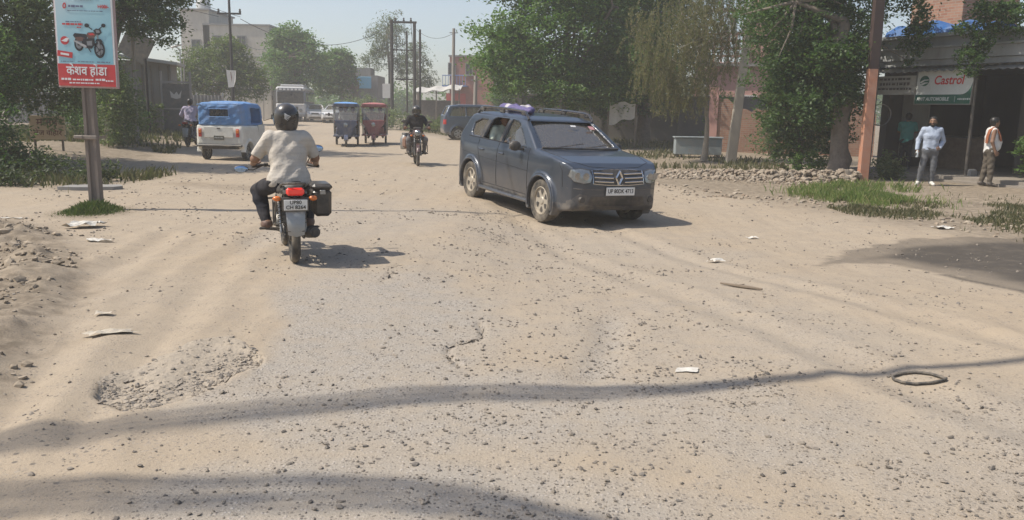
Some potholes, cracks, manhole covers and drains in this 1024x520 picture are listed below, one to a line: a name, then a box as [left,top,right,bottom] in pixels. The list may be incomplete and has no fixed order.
pothole [94,335,263,411]
crack [440,326,484,368]
